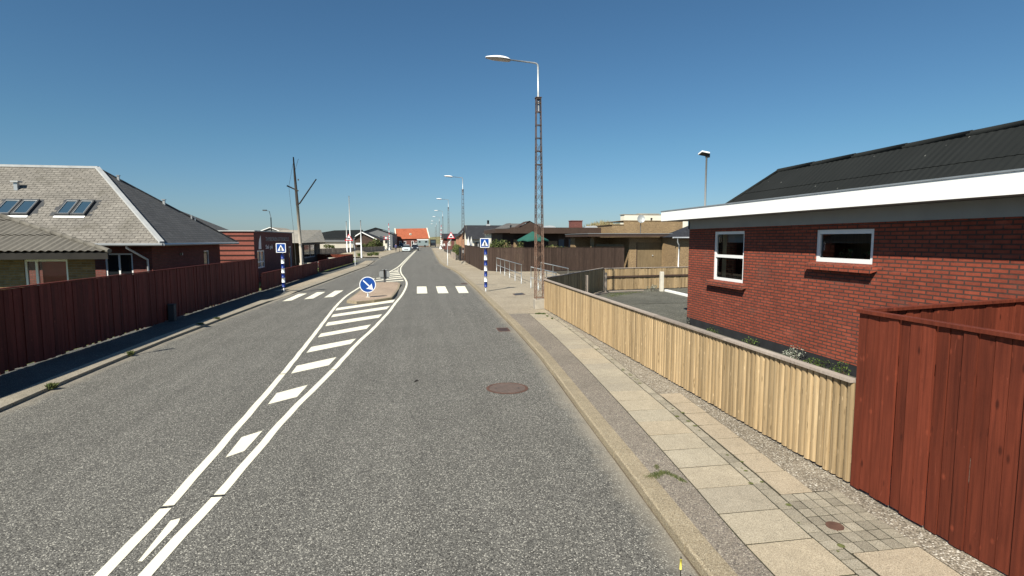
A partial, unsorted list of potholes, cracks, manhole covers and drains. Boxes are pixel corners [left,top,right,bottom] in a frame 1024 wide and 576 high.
utility cover [825,521,844,531]
manhole cover [486,383,528,394]
